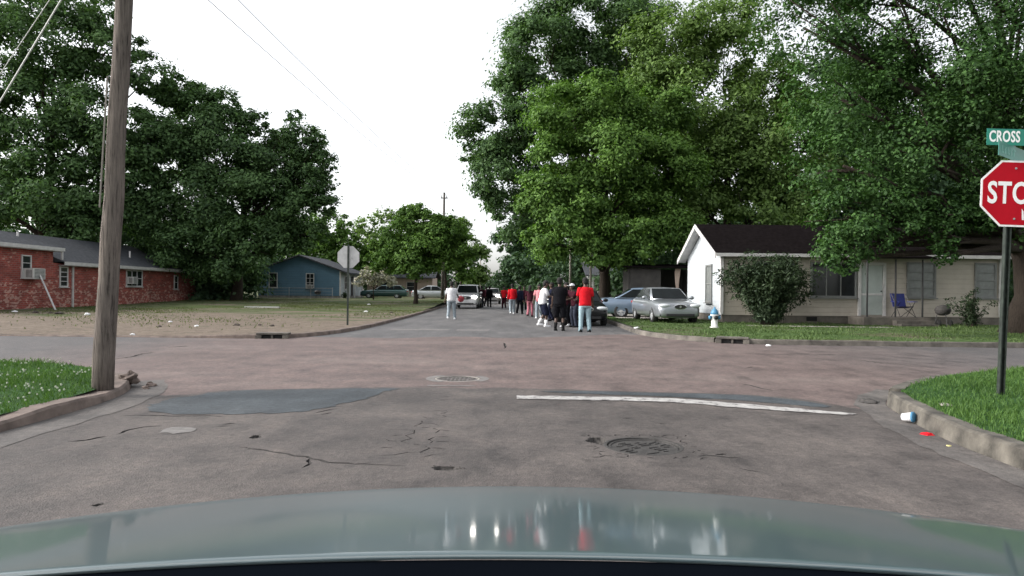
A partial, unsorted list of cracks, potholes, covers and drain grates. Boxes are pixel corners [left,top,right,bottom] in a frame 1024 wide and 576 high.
drain grate [715,336,750,344]
crack [69,415,236,442]
manhole cover [604,437,684,456]
crack [242,410,448,468]
